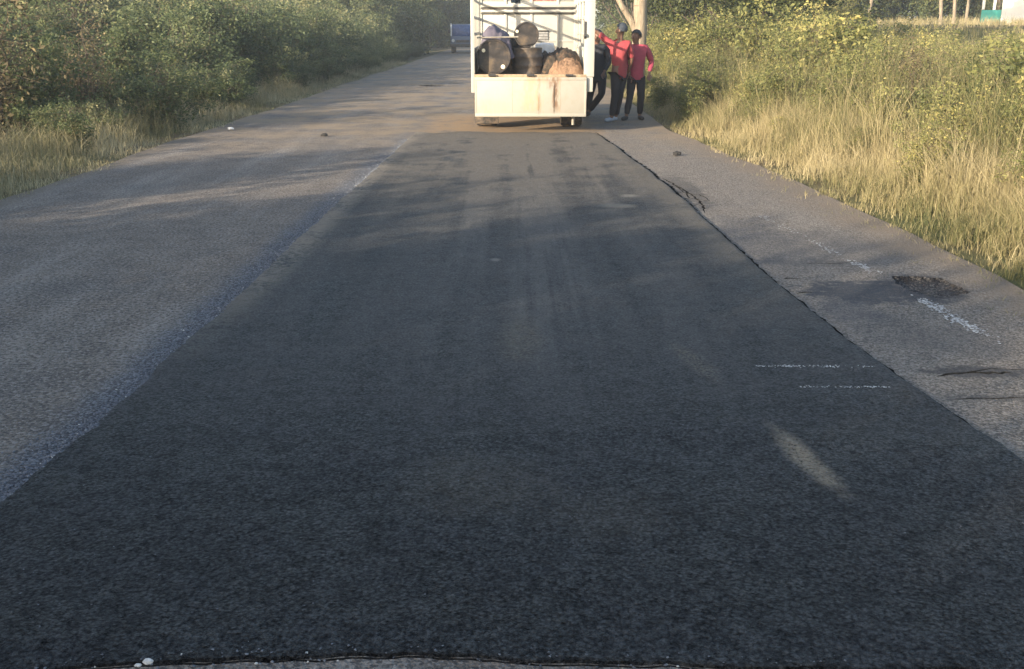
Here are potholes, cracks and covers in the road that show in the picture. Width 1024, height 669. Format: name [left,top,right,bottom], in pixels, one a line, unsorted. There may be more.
pothole [891,276,969,298]
crack [595,132,1024,426]
